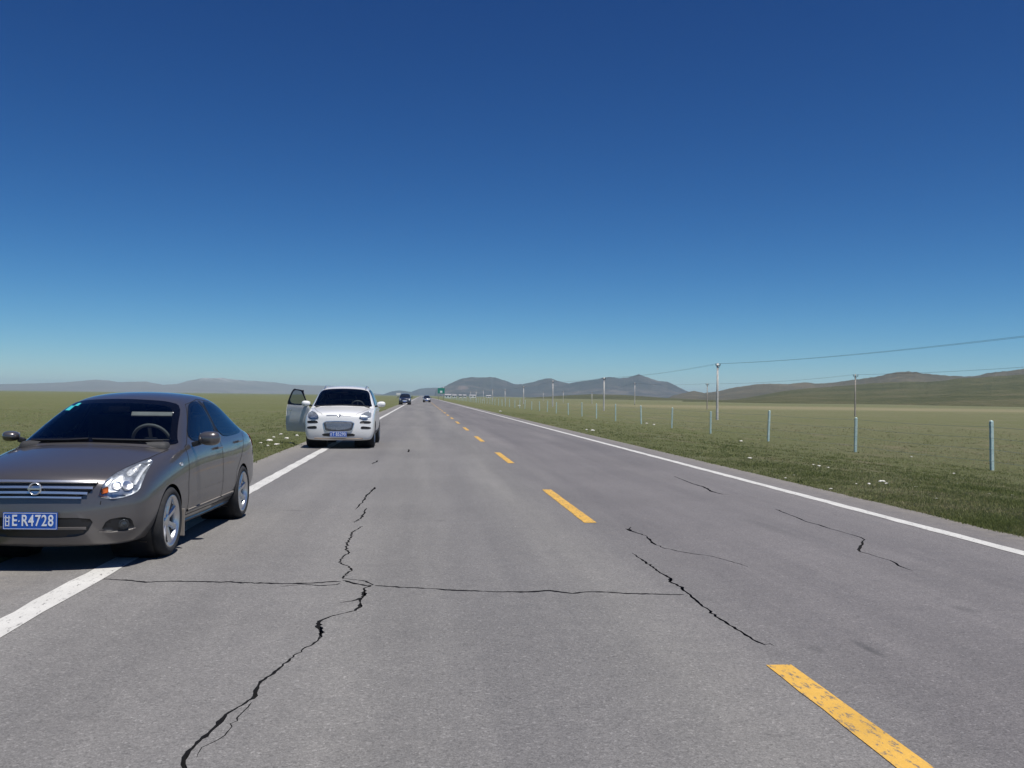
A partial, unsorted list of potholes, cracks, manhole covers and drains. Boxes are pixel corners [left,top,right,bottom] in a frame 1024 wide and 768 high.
crack [109,487,774,768]
crack [776,509,907,569]
